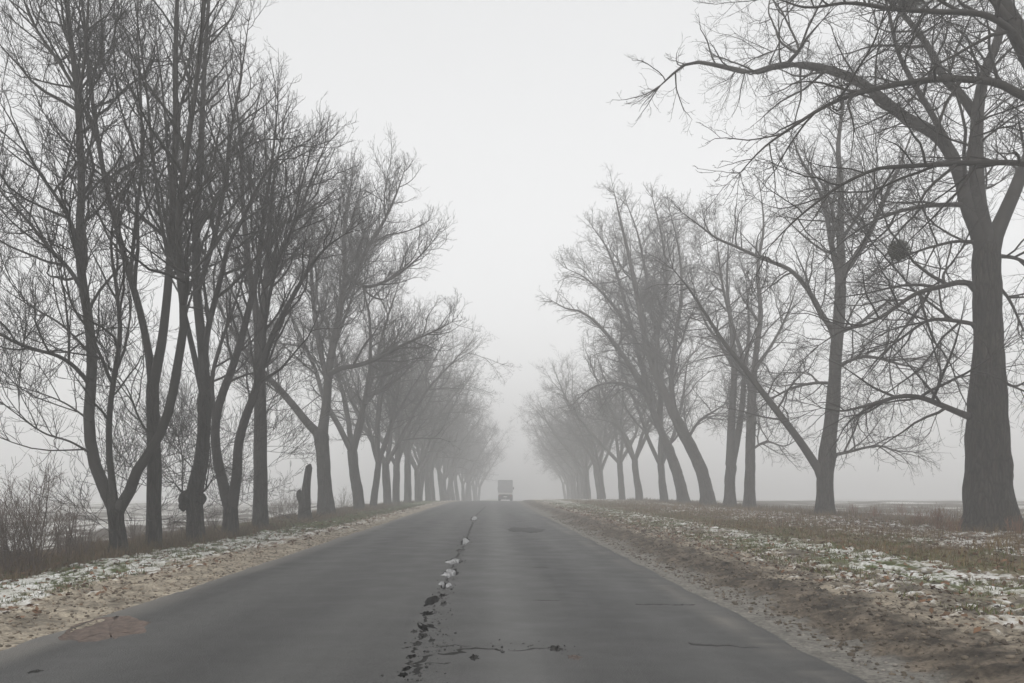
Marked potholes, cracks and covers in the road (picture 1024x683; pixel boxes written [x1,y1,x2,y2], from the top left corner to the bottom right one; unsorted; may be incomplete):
crack [404,644,546,675]
